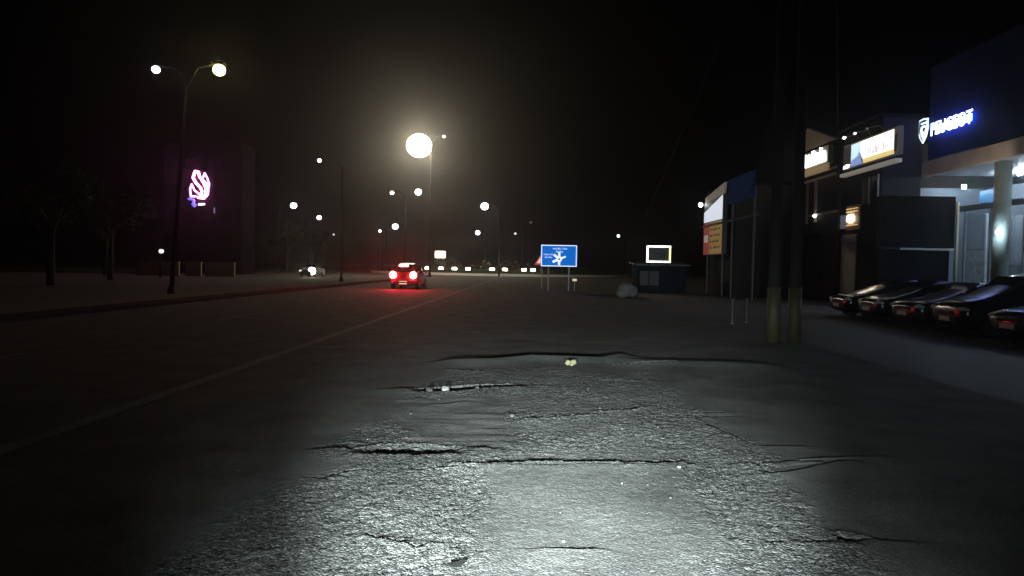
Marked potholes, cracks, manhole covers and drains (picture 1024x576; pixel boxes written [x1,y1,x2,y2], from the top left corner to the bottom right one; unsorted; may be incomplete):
crack [363,534,431,549]
crack [410,411,889,474]
crack [526,404,641,419]
